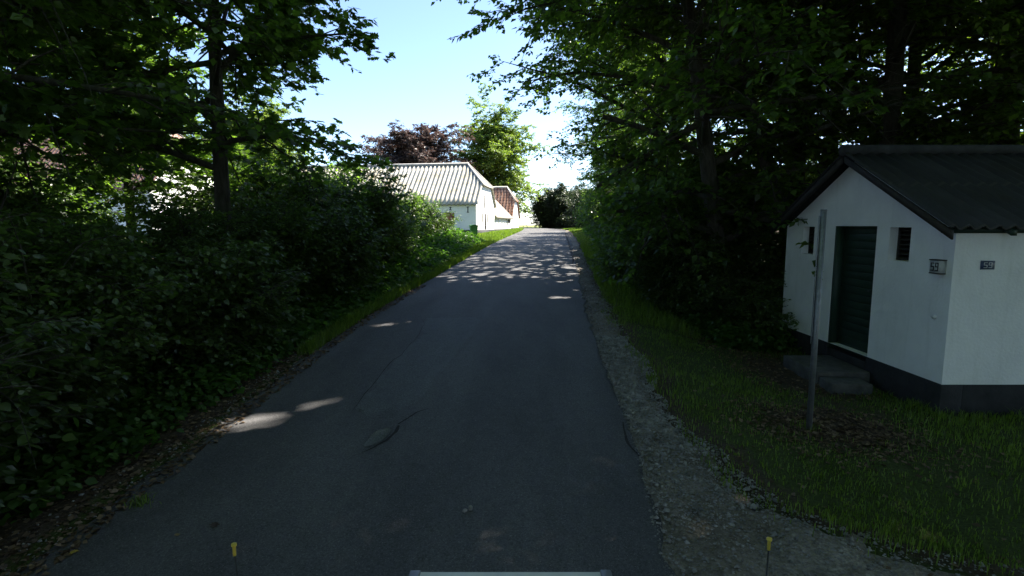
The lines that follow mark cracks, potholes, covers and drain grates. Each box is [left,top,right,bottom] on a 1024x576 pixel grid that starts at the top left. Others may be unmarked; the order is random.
crack [353,321,425,410]
